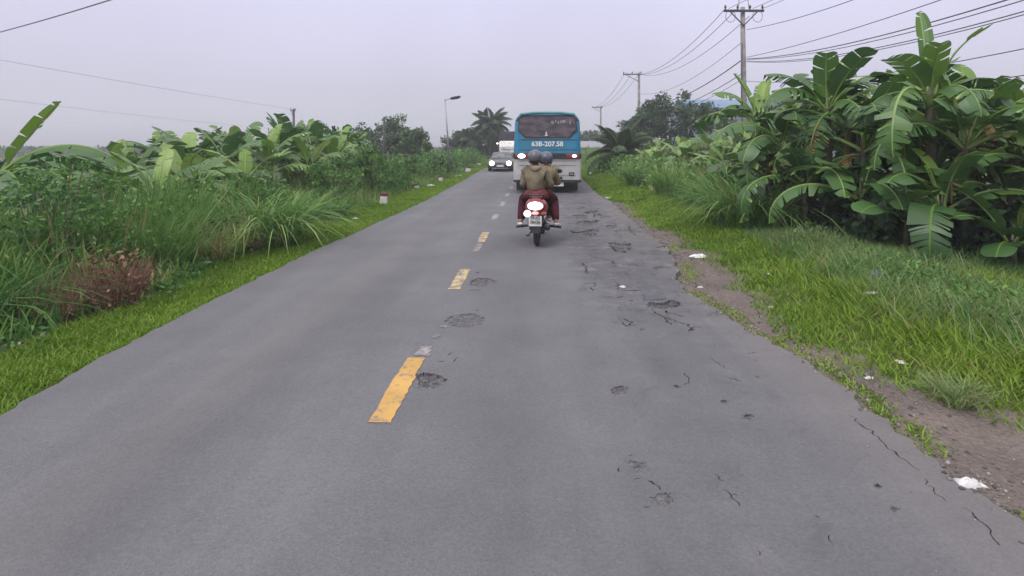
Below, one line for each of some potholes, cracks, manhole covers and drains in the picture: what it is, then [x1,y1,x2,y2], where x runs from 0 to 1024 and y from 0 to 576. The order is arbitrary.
pothole [610,383,632,397]
pothole [608,242,633,253]
pothole [468,278,497,287]
pothole [415,370,448,390]
pothole [649,489,674,508]
pothole [444,313,485,328]
crack [564,200,696,331]
pothole [623,458,646,472]
crack [848,414,946,501]
pothole [645,300,681,311]
crack [964,507,1000,545]
